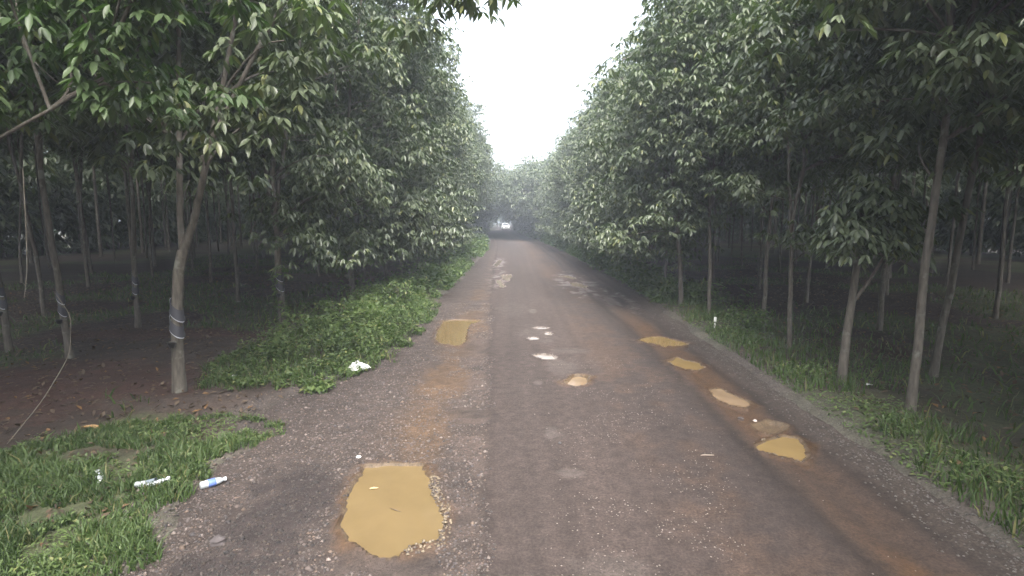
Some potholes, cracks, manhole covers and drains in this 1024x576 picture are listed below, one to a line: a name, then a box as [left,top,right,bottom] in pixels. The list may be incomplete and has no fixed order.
pothole [432,319,483,347]
pothole [665,356,708,371]
pothole [563,373,592,387]
pothole [749,419,792,436]
pothole [333,460,449,563]
pothole [708,387,755,409]
pothole [752,434,813,462]
pothole [637,336,692,348]
